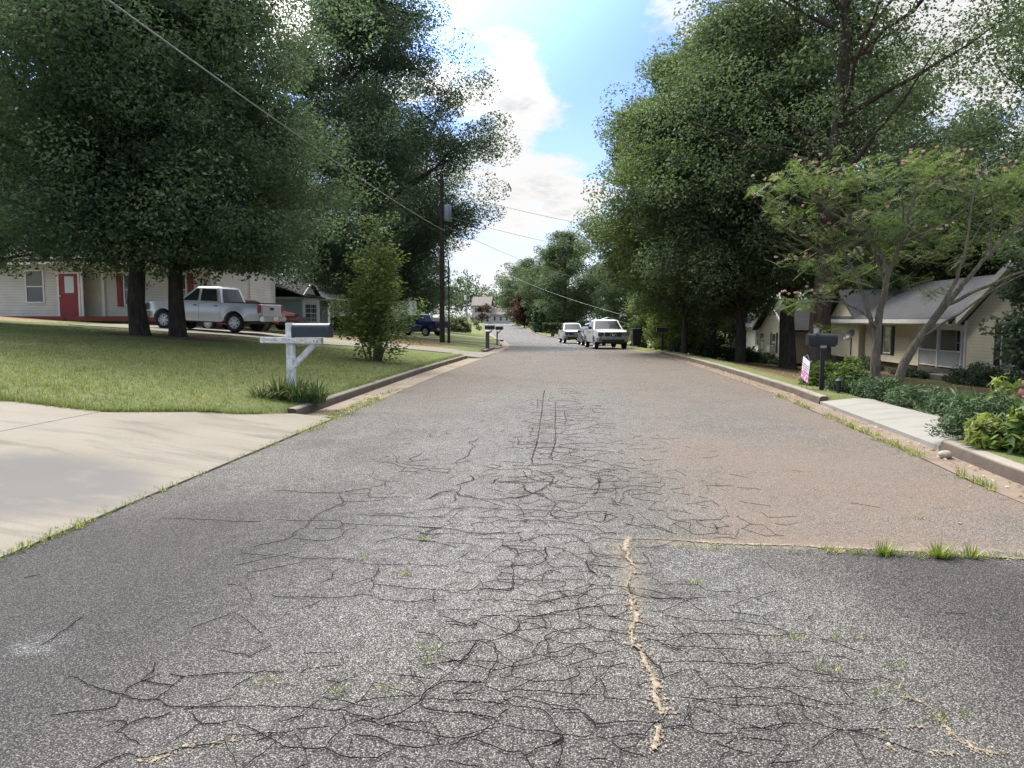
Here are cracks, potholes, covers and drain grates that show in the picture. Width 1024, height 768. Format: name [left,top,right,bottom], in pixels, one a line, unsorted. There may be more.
crack [51,388,1009,768]
